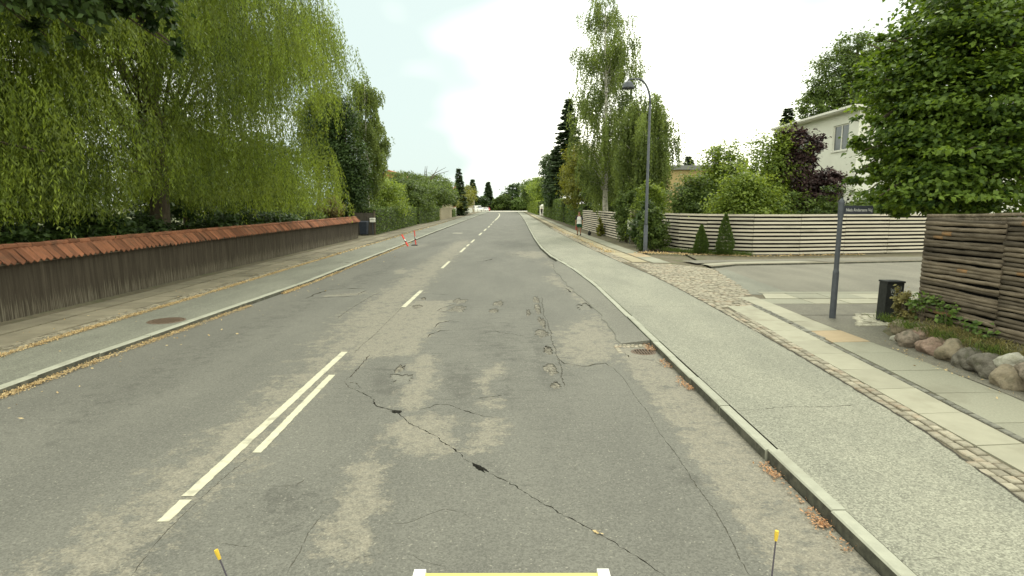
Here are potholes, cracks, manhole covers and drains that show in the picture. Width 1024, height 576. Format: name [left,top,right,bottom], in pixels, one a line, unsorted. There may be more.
pothole [543,363,559,376]
crack [343,356,659,572]
pothole [390,374,413,384]
